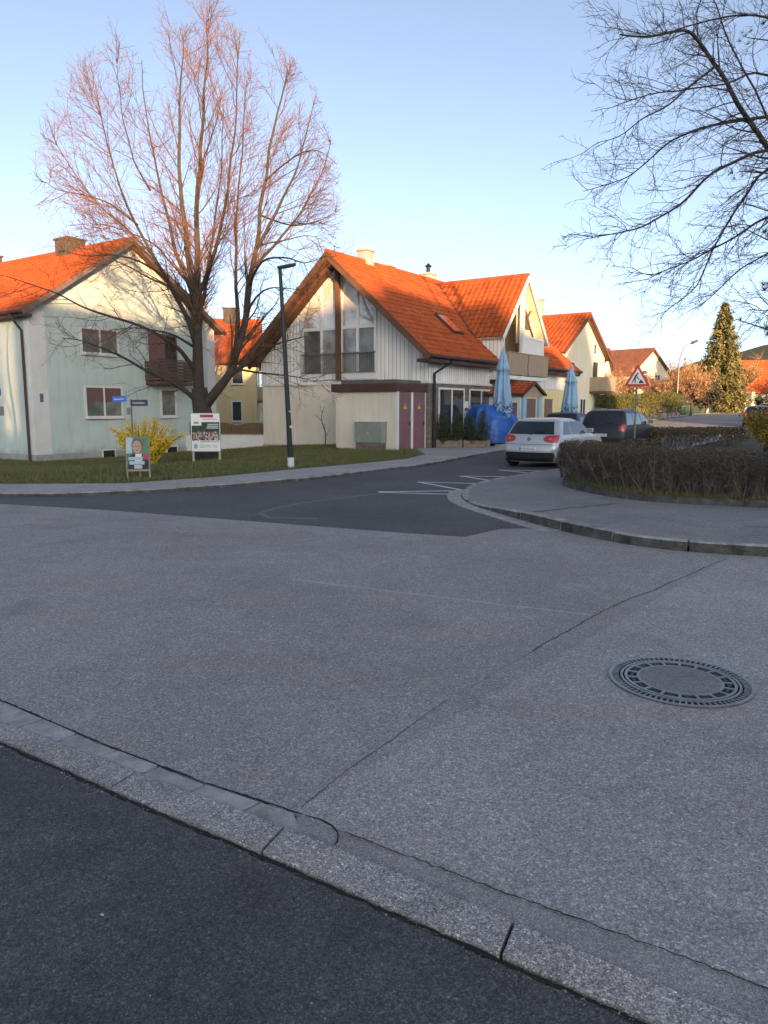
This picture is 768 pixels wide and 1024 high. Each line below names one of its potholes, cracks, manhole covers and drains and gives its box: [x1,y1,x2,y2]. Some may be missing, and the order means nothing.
manhole cover [609,657,756,709]
